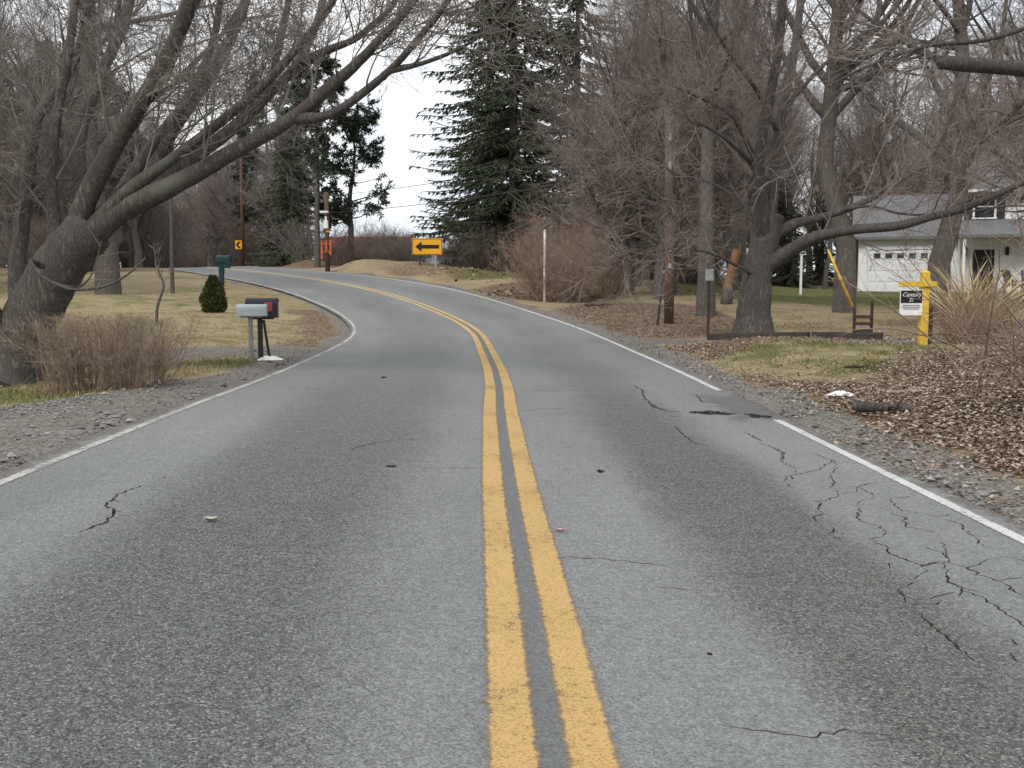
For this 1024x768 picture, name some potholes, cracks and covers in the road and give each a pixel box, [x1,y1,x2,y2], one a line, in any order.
crack [716,723,901,739]
crack [564,557,668,566]
crack [744,431,786,461]
crack [633,385,711,446]
crack [78,485,141,533]
